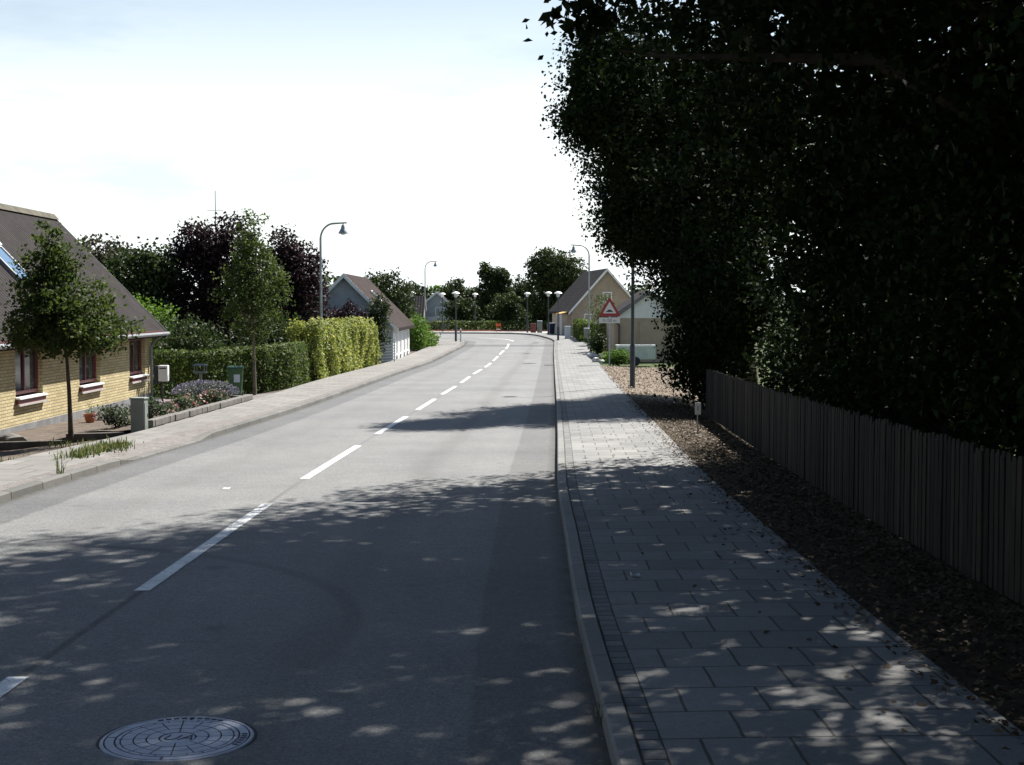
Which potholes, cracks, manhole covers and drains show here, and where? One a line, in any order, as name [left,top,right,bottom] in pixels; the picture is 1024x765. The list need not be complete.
manhole cover [95,716,258,762]
